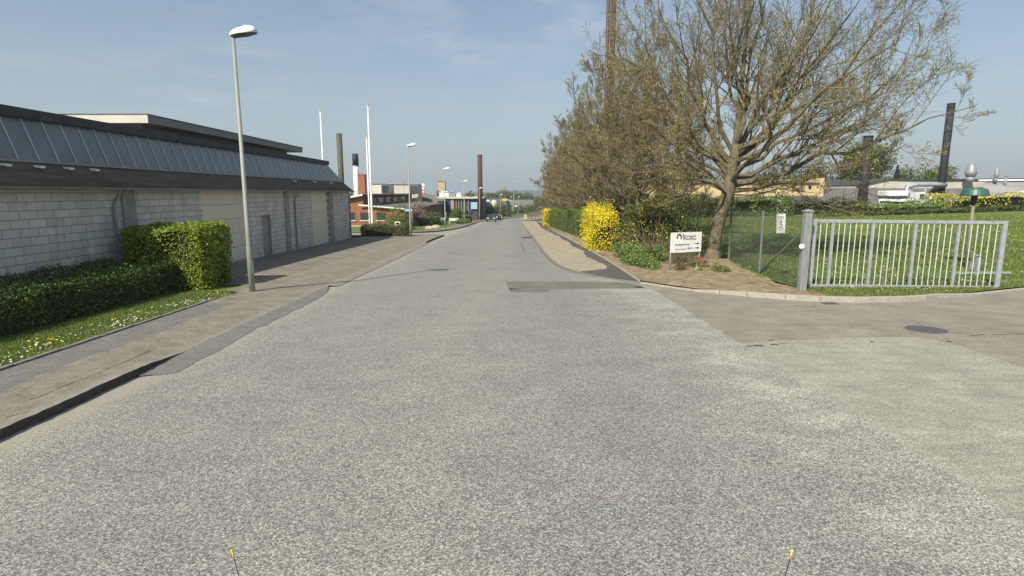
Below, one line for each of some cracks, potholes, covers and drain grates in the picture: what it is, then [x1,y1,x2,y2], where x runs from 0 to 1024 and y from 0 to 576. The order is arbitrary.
manhole cover [905,325,948,334]
